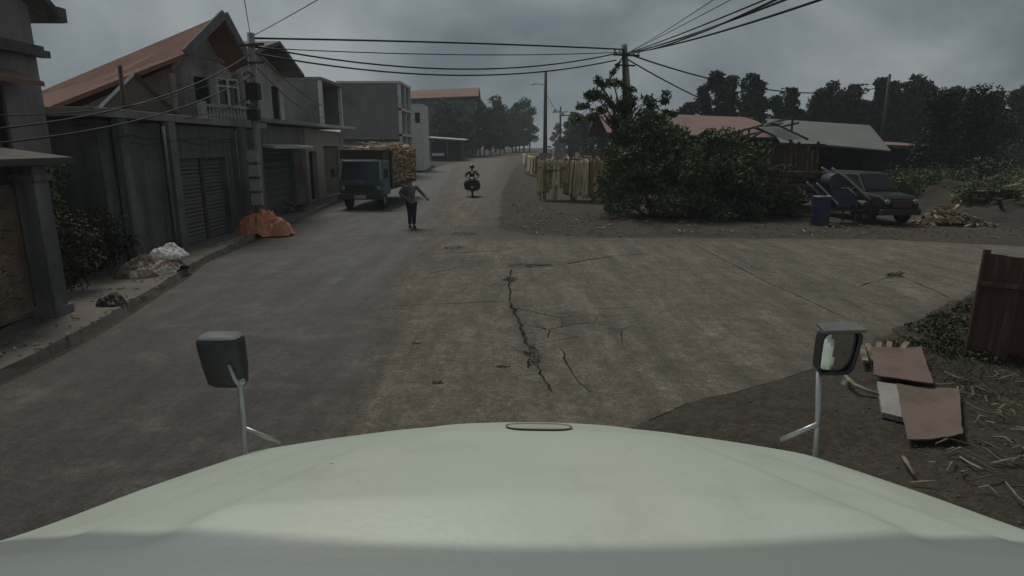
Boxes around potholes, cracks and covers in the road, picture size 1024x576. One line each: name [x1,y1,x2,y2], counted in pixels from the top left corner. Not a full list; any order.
crack [558,254,641,265]
crack [396,270,640,393]
